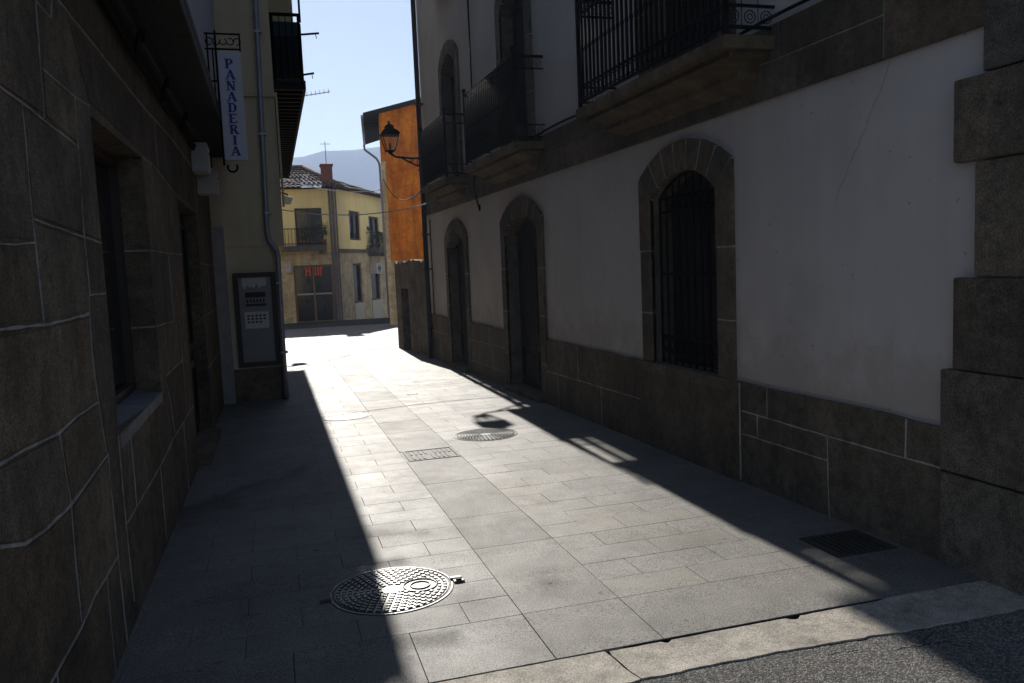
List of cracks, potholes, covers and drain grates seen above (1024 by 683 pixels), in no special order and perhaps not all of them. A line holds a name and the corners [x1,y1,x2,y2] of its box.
manhole cover [320,567,465,616]
manhole cover [320,412,371,421]
manhole cover [454,428,518,441]
drain grate [799,529,898,558]
